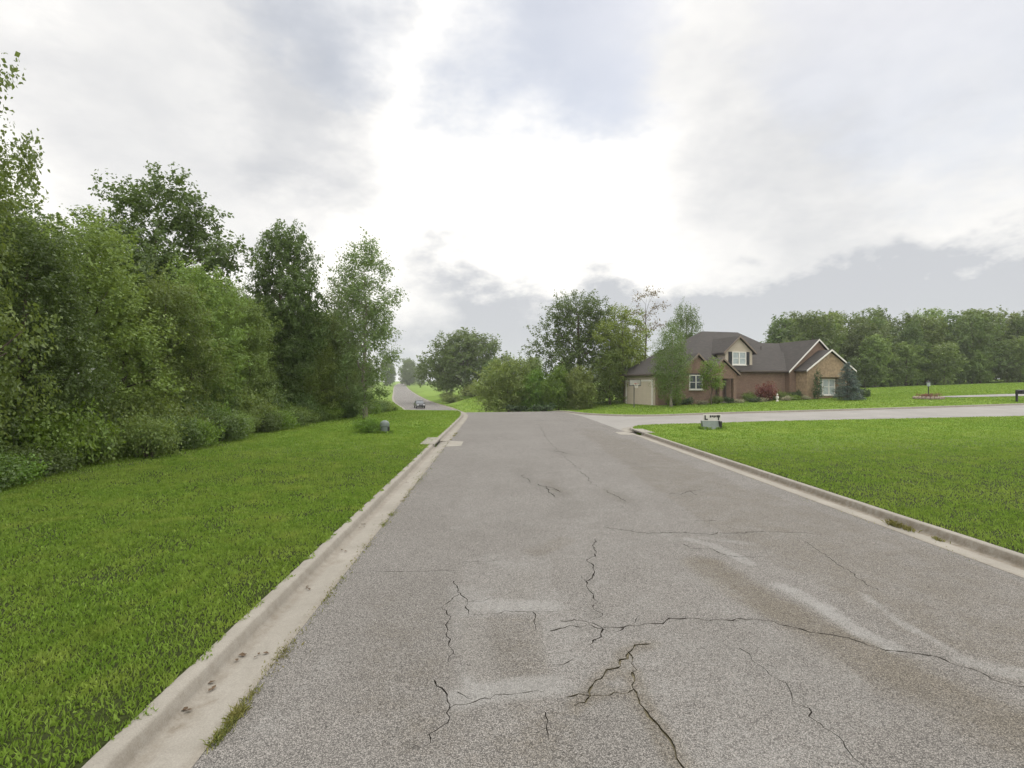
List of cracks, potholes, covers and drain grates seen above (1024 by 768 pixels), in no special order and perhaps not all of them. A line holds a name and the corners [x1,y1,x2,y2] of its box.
crack [387,520,1024,768]
